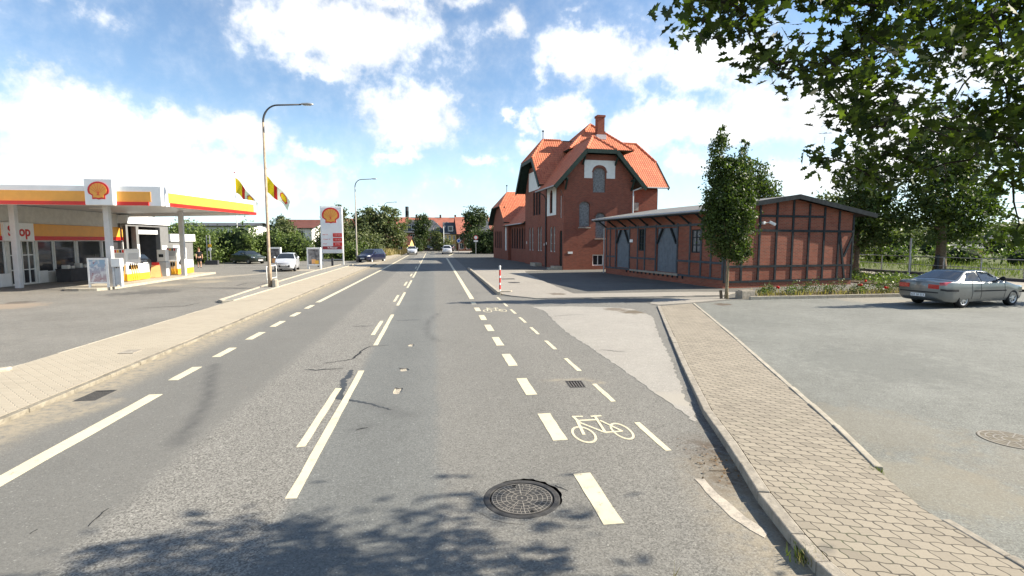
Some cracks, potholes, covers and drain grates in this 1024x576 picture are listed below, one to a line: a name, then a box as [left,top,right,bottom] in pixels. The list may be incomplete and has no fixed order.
manhole cover [484,479,562,519]
crack [308,345,384,370]
drain grate [74,390,116,401]
manhole cover [976,430,1024,449]
